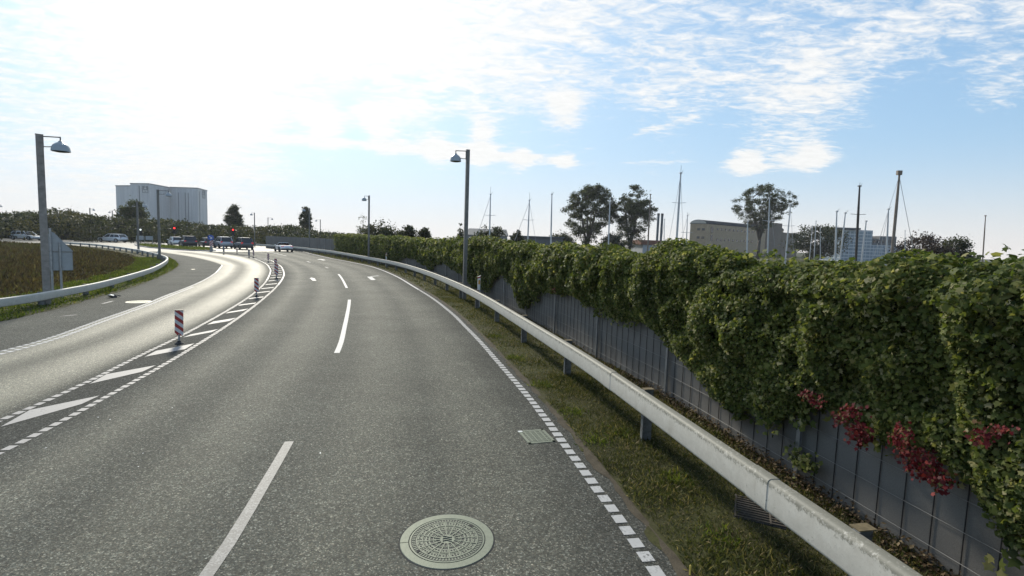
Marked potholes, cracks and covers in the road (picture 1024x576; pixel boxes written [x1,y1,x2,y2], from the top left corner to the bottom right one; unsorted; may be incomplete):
manhole cover [398,514,495,570]
drain grate [733,494,790,531]
